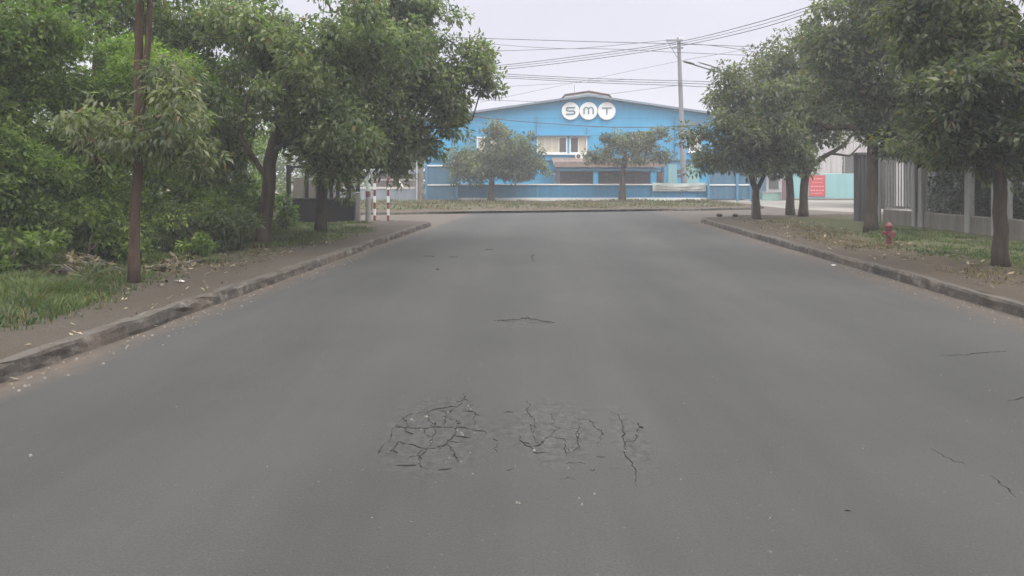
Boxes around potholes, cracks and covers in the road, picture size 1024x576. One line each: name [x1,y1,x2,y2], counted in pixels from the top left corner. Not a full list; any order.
crack [378,397,498,472]
crack [504,403,644,486]
